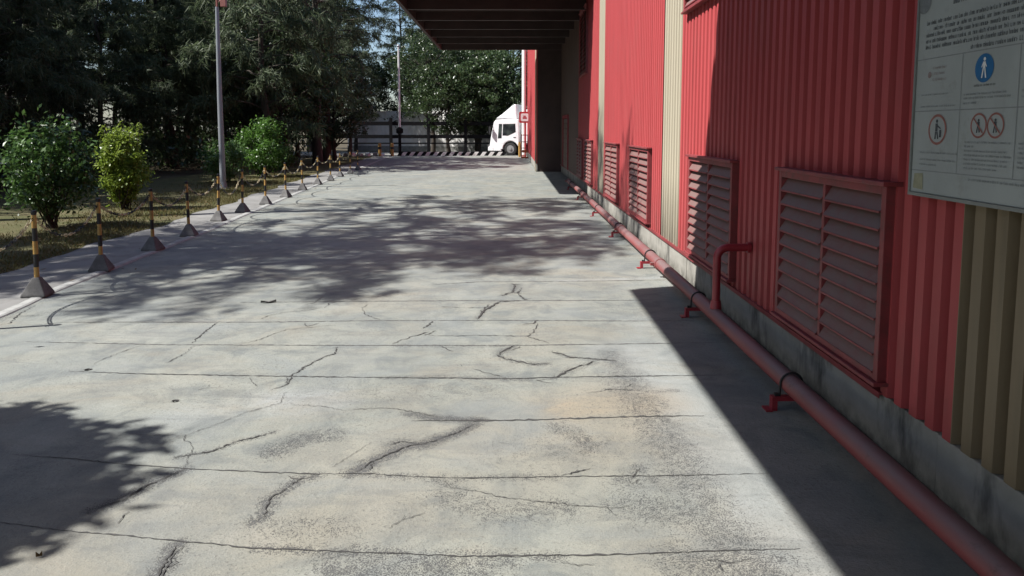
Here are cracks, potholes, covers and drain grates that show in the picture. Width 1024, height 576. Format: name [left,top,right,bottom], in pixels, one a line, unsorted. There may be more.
crack [394,284,640,393]
crack [94,347,337,523]
crack [309,405,473,471]
